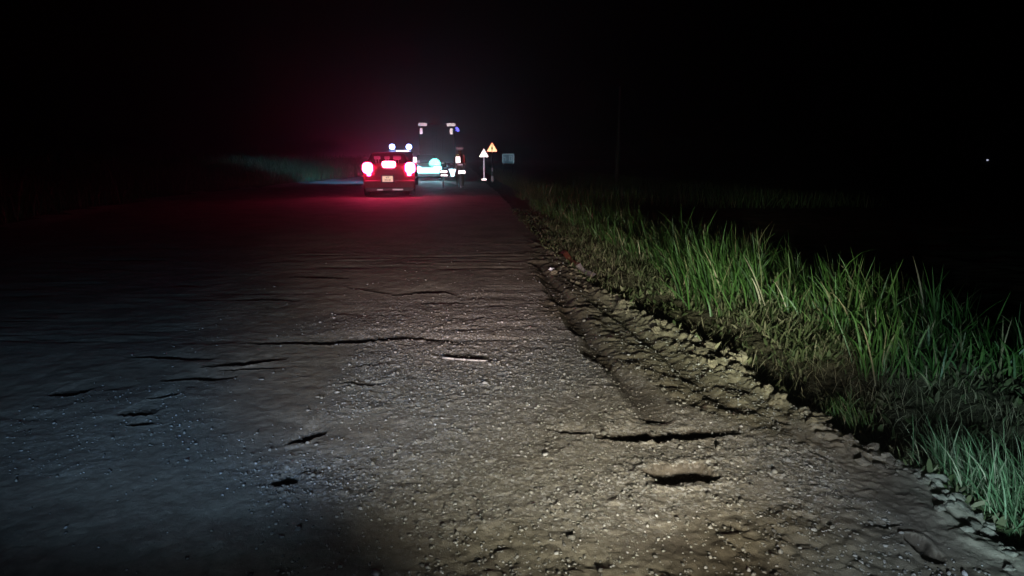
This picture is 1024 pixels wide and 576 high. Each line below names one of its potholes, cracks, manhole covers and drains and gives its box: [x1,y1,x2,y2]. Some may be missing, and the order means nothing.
crack [123,336,463,400]
crack [288,275,461,298]
pothole [268,477,300,487]
pothole [640,461,722,485]
crack [544,428,603,436]
